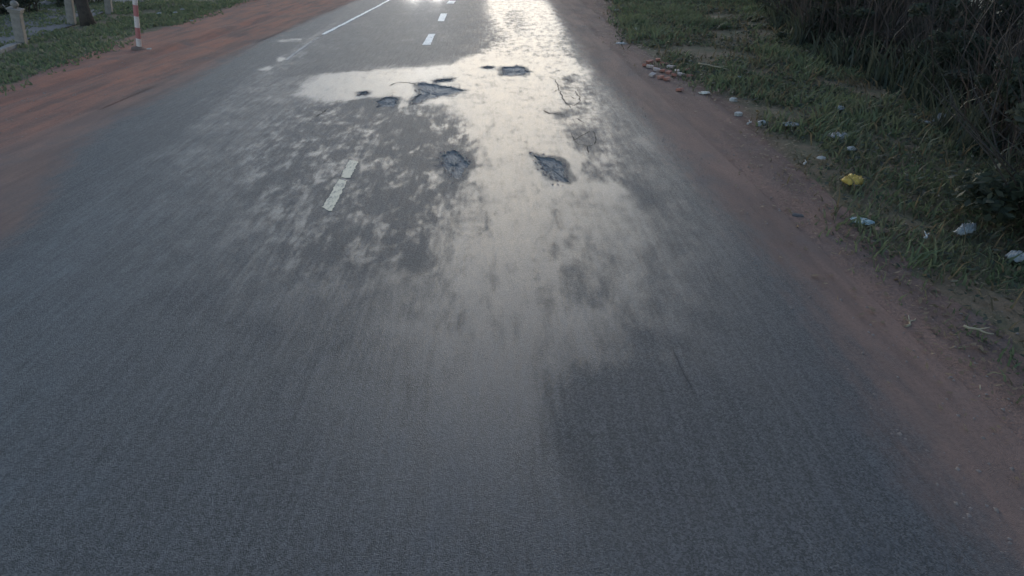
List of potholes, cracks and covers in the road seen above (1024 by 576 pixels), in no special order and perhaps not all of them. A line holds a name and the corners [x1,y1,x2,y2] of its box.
pothole [411,82,464,104]
pothole [534,155,569,182]
pothole [442,150,470,179]
pothole [376,97,397,108]
pothole [501,66,529,76]
crack [543,77,596,153]
